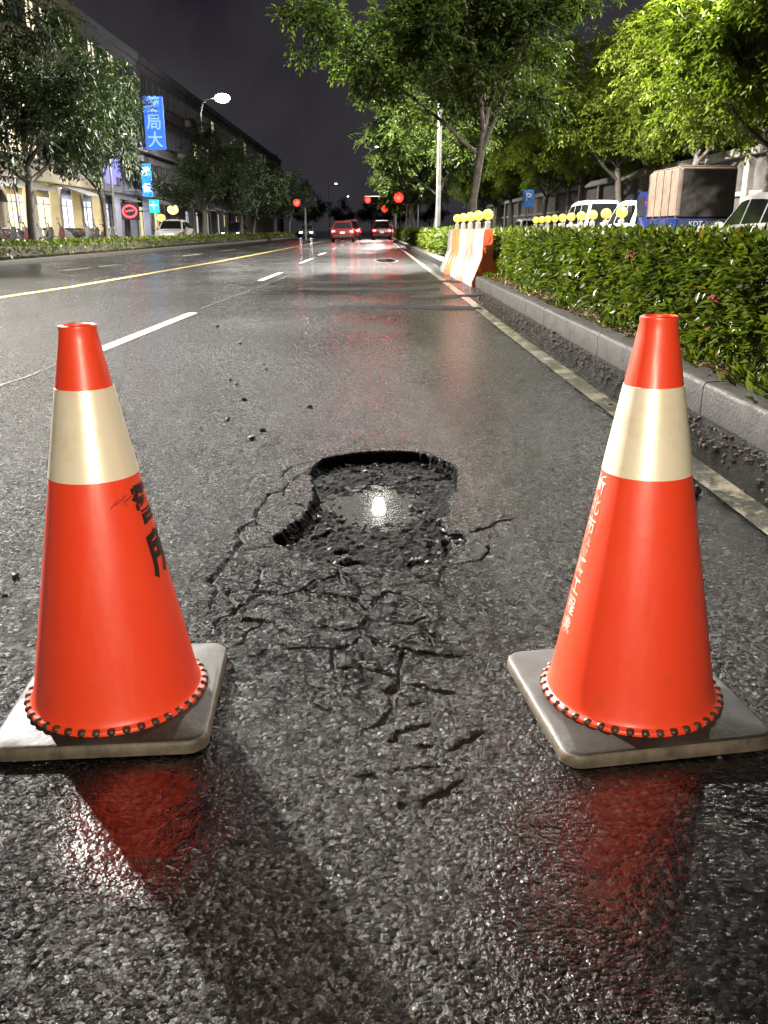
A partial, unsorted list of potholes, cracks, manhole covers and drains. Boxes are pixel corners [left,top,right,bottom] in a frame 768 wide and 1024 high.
pothole [267,450,490,574]
crack [394,768,462,810]
crack [439,520,511,561]
crack [450,732,485,752]
crack [205,464,461,749]
